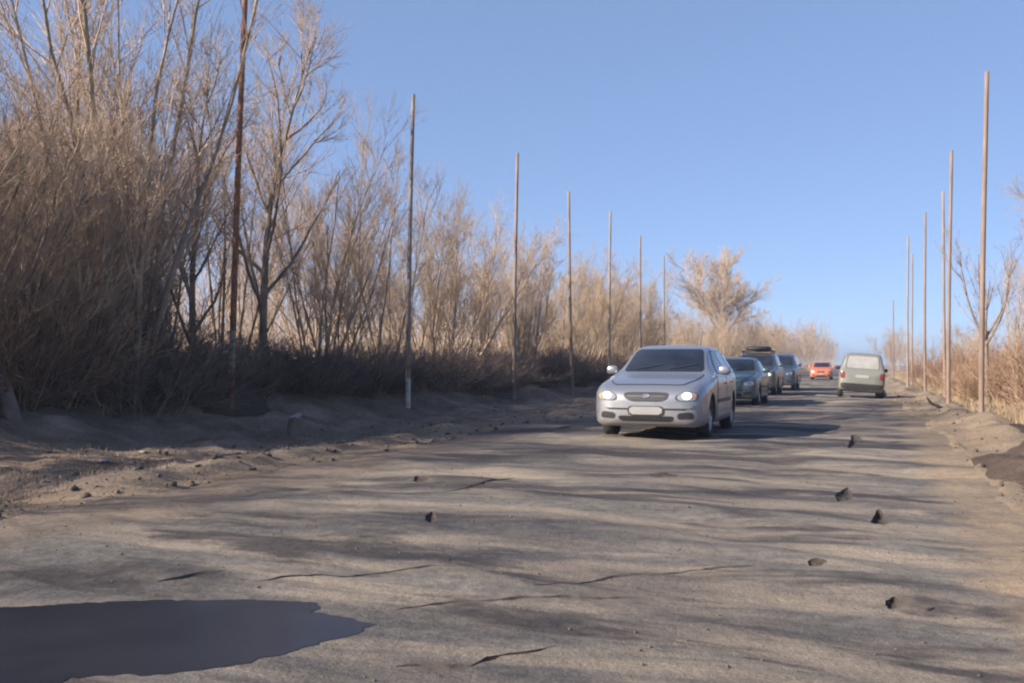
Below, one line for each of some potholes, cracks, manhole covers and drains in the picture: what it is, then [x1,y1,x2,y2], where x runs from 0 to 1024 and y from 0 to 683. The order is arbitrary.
crack [158,570,222,582]
crack [253,565,462,582]
crack [443,478,513,492]
pothole [0,599,375,683]
crack [396,645,555,669]
crack [396,564,760,610]
